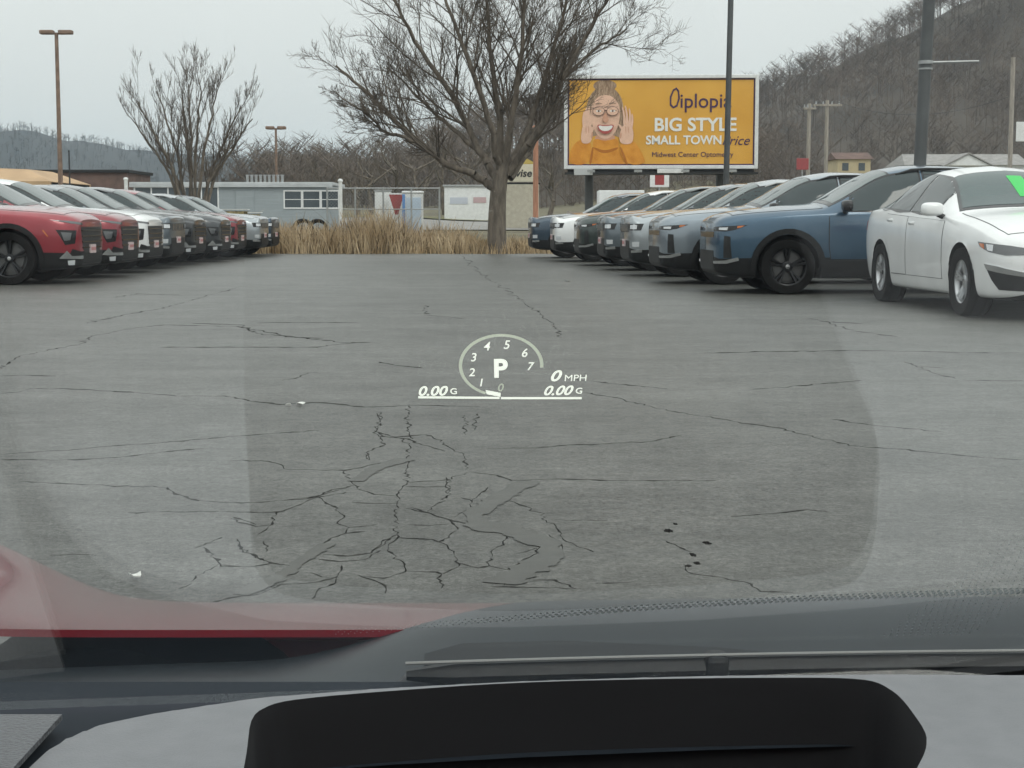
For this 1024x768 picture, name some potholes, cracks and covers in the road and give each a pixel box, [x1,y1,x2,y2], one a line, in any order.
crack [666,541,792,593]
crack [463,256,562,338]
crack [0,286,716,602]
crack [576,379,1018,460]
